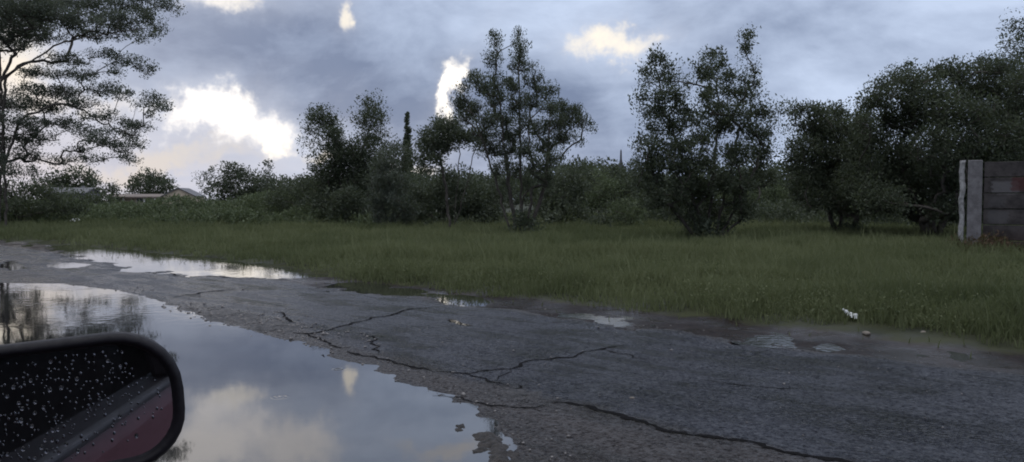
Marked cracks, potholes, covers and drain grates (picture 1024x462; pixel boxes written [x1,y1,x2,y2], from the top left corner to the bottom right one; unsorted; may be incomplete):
pothole [244,319,309,335]
crack [274,308,852,462]
pothole [195,307,264,324]
